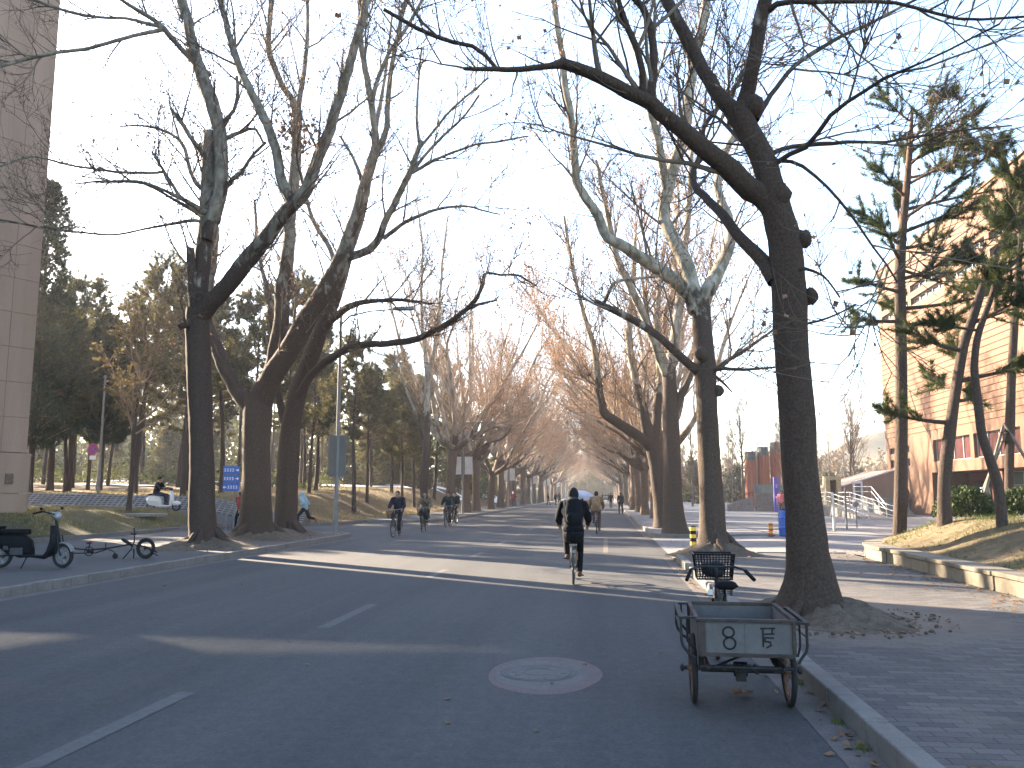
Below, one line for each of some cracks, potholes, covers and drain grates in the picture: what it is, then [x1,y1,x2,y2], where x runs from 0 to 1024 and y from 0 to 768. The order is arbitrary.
manhole cover [488,657,603,695]
